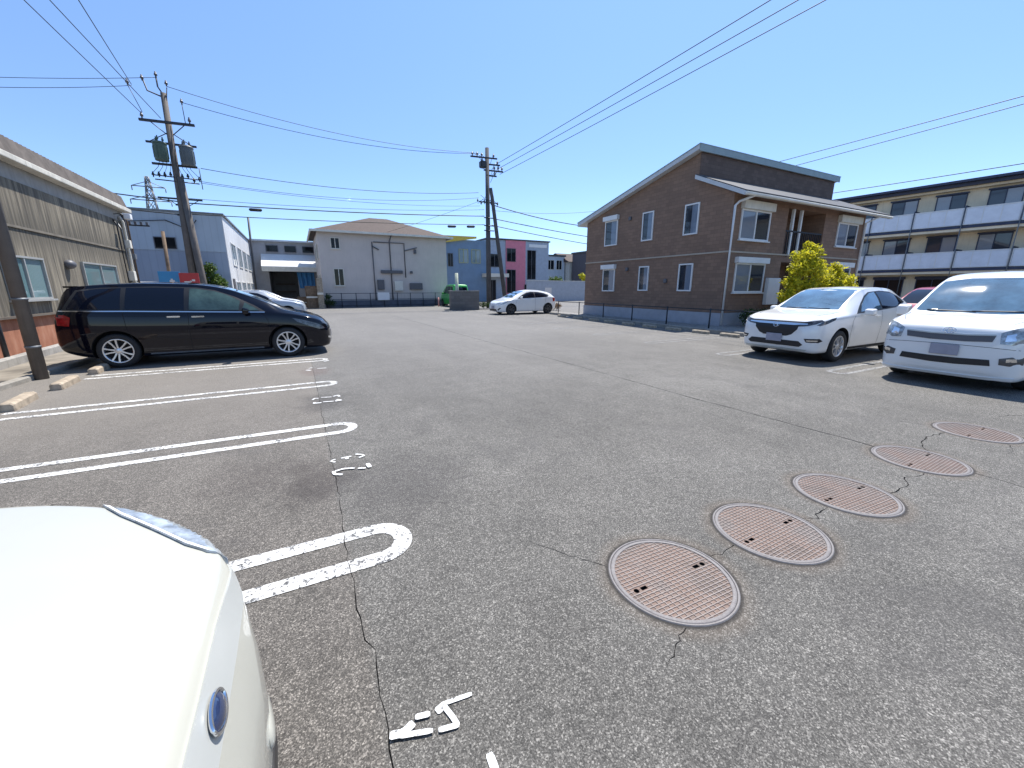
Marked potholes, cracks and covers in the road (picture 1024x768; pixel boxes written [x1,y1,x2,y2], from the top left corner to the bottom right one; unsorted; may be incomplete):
manhole cover [871,445,974,476]
crack [312,366,394,768]
manhole cover [932,422,1024,444]
manhole cover [608,539,741,630]
manhole cover [793,473,905,518]
manhole cover [712,503,835,565]
